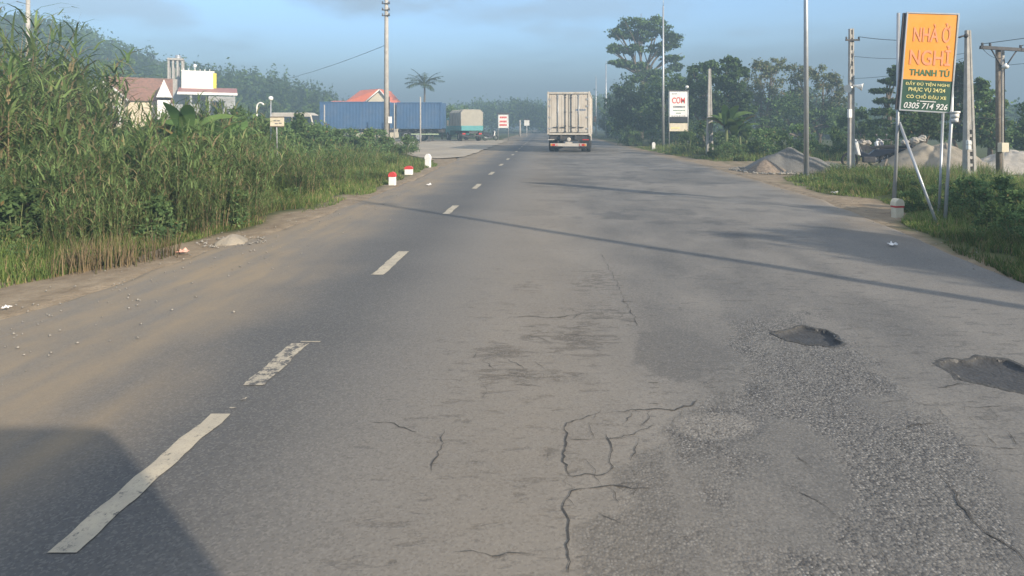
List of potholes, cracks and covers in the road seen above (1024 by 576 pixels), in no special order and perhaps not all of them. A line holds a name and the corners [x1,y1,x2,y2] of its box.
crack [938,472,1024,559]
crack [453,255,696,570]
pothole [933,354,1024,394]
pothole [770,325,847,348]
